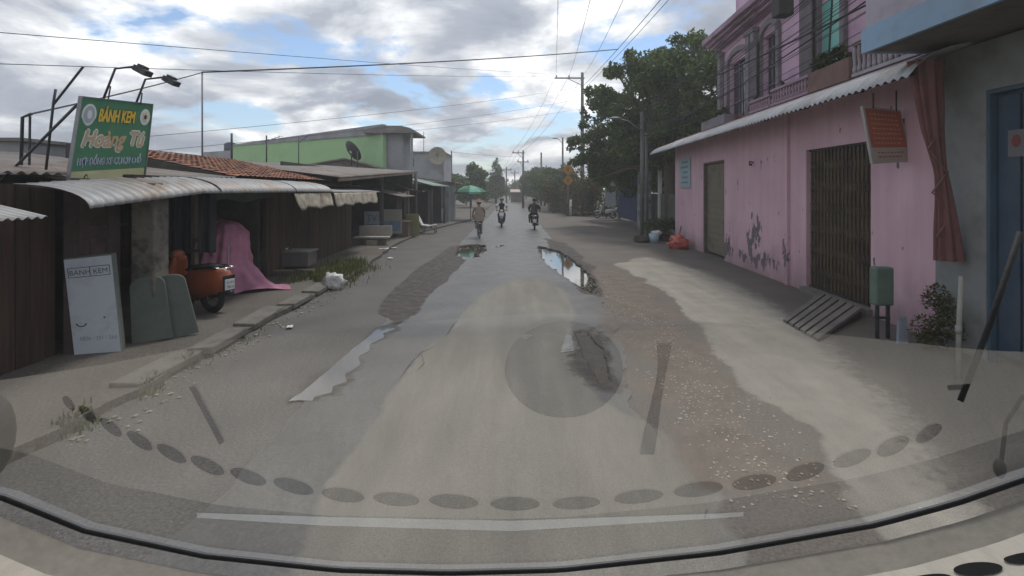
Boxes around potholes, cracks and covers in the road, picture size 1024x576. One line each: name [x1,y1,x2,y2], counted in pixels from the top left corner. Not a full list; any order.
pothole [453,244,490,260]
pothole [569,330,617,385]
pothole [534,246,605,296]
crack [401,322,456,376]
